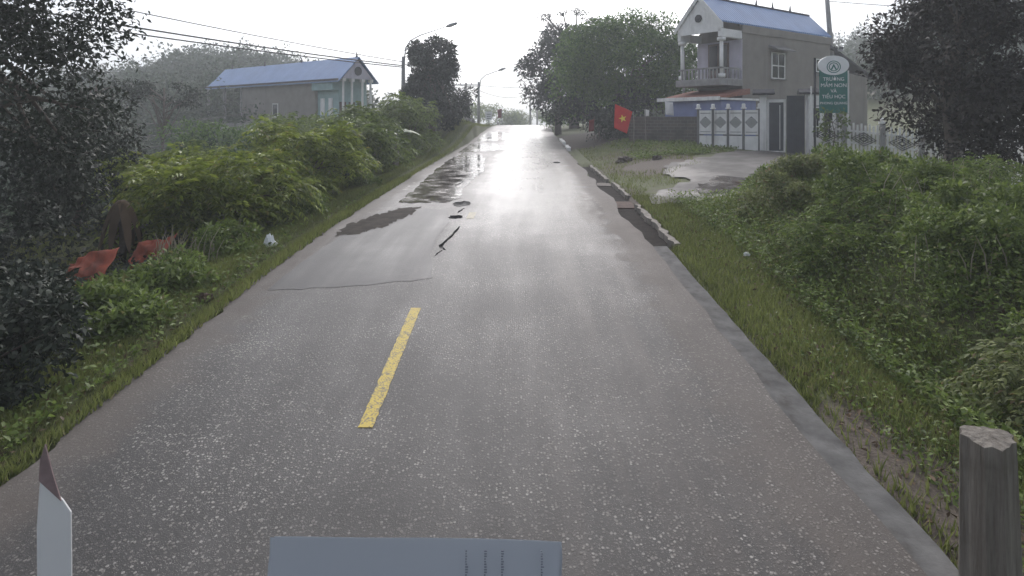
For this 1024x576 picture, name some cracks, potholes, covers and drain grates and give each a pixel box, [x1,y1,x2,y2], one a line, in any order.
crack [435,208,465,256]
